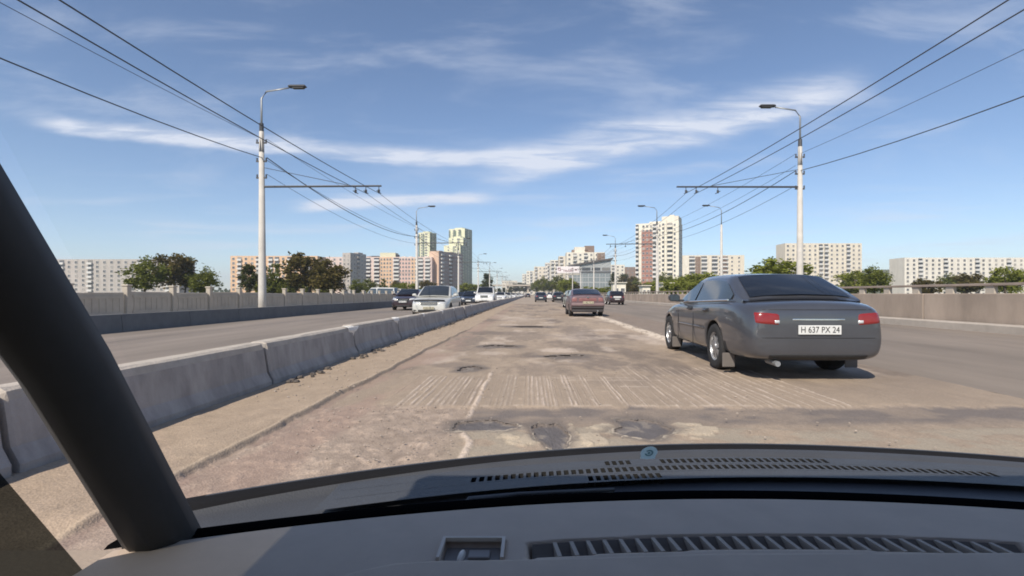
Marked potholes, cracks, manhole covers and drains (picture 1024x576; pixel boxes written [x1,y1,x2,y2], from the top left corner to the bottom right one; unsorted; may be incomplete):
pothole [529,422,572,450]
pothole [611,418,675,440]
pothole [449,419,522,432]
